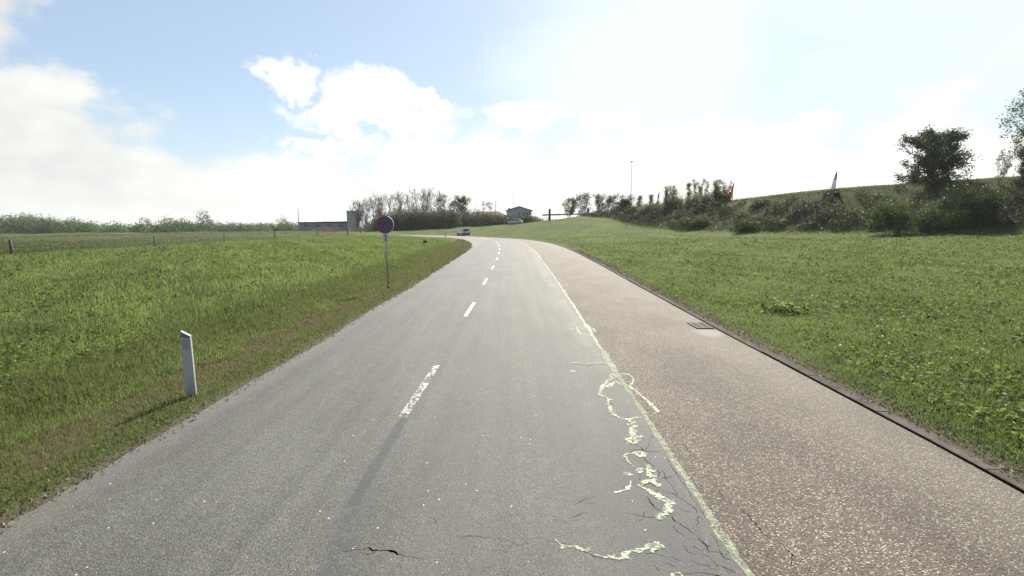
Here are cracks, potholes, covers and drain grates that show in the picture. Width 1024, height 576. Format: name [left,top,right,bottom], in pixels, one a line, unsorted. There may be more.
crack [601,377,800,576]
crack [343,543,421,559]
